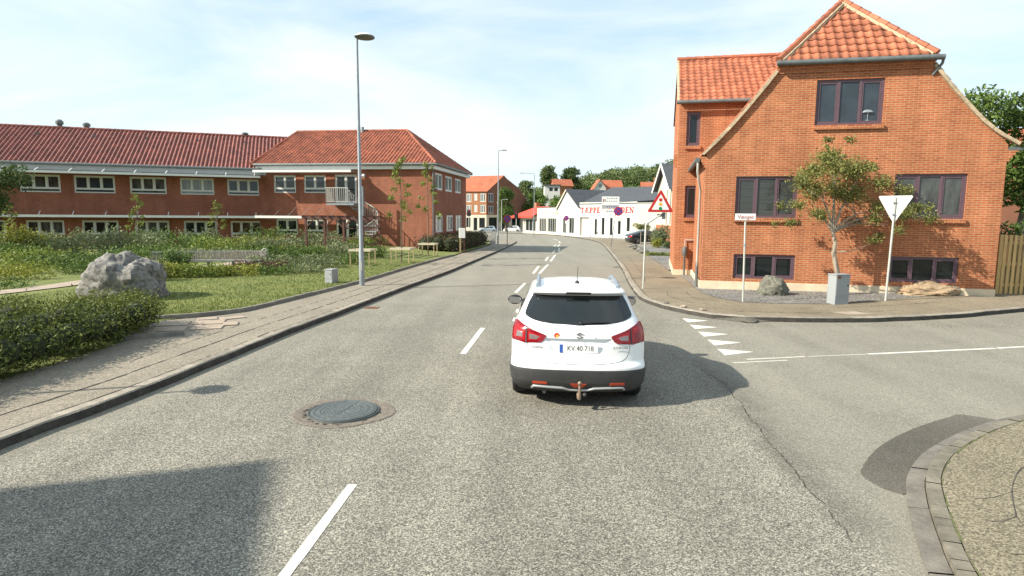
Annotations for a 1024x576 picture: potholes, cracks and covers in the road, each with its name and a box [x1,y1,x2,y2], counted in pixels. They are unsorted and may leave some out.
manhole cover [291,398,396,428]
crack [701,369,852,542]
